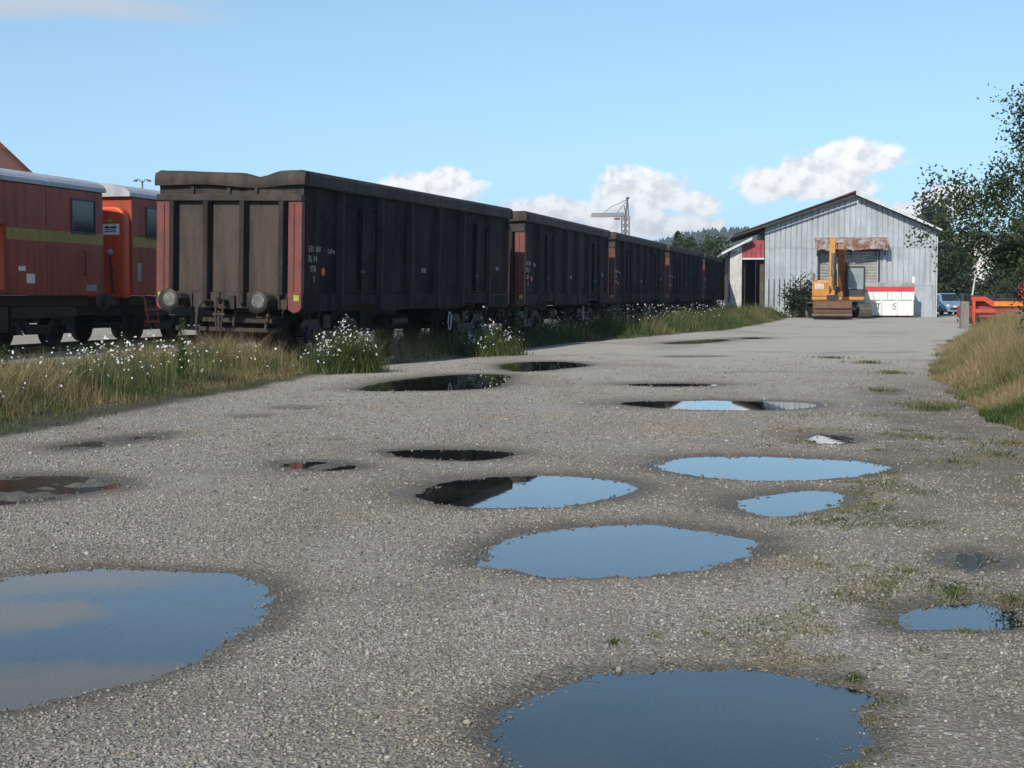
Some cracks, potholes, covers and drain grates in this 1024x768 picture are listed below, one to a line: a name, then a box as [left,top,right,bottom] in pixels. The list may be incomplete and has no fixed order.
pothole [631,452,909,482]
pothole [344,373,521,392]
pothole [260,458,380,473]
pothole [371,445,539,462]
pothole [433,653,936,768]
pothole [384,471,662,512]
pothole [0,559,319,721]
pothole [0,470,146,507]
pothole [30,431,189,452]
pothole [605,398,835,411]
pothole [446,517,794,581]
